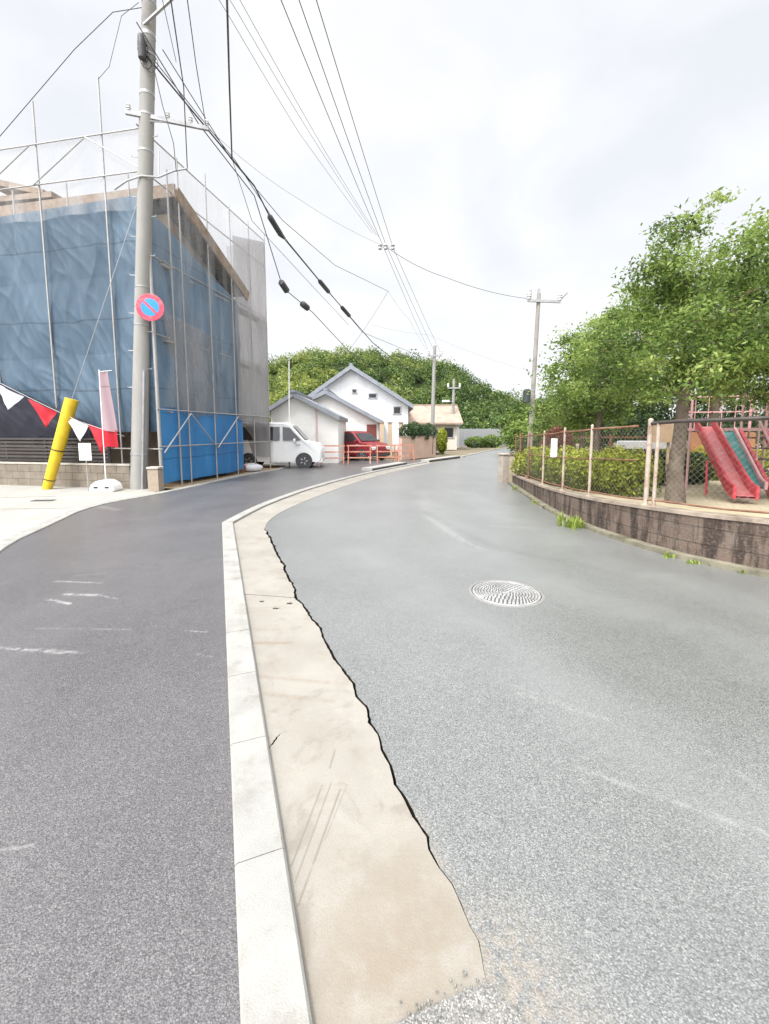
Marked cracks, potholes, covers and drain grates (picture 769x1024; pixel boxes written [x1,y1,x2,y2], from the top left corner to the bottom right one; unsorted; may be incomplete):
crack [247,529,486,979]
manhole cover [468,579,545,608]
